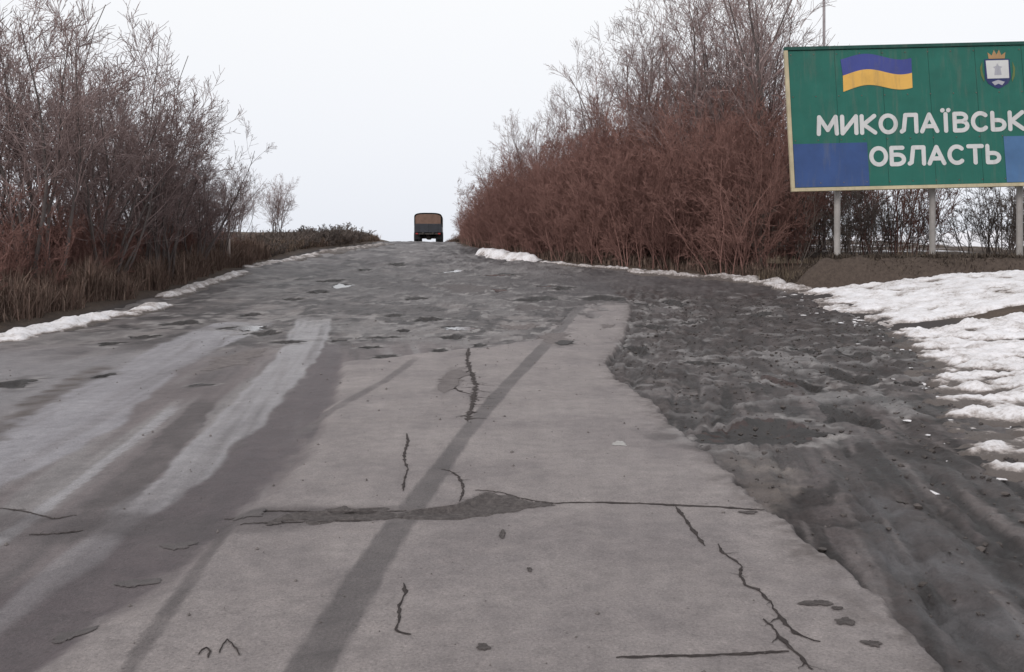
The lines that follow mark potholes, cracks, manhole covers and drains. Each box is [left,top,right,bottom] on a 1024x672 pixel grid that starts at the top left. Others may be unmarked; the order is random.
pothole [279,506,397,525]
crack [394,583,411,635]
crack [198,639,241,658]
crack [0,508,83,535]
crack [718,544,824,670]
pothole [834,617,855,625]
crack [439,348,493,421]
pothole [0,379,38,389]
pothole [397,492,555,520]
crack [442,469,560,504]
crack [401,433,410,491]
